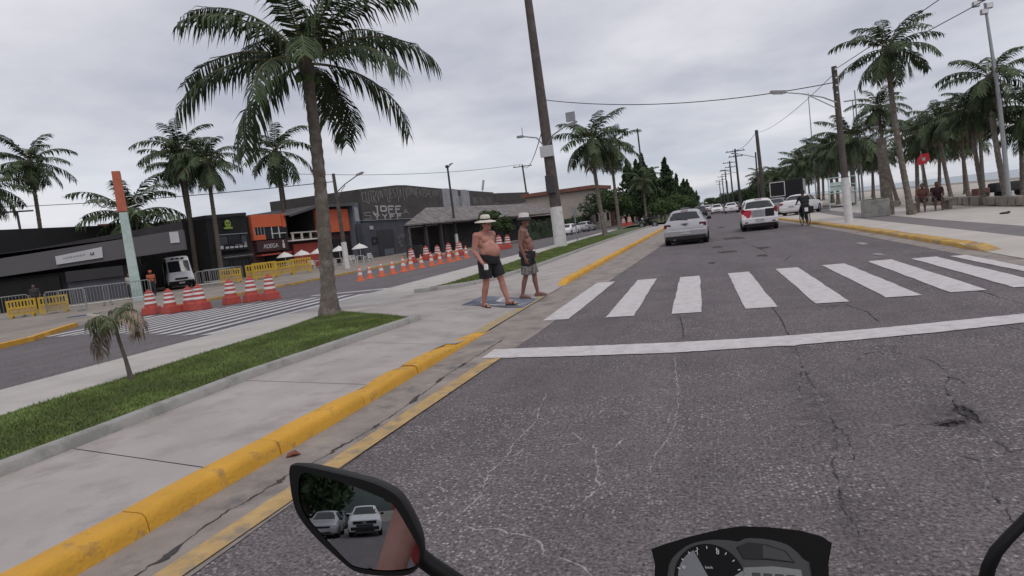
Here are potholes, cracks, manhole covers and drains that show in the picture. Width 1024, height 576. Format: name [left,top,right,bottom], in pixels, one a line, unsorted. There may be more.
pothole [952,404,981,423]
crack [457,394,592,576]
crack [771,304,1024,536]
crack [559,432,629,508]
crack [649,356,680,472]
